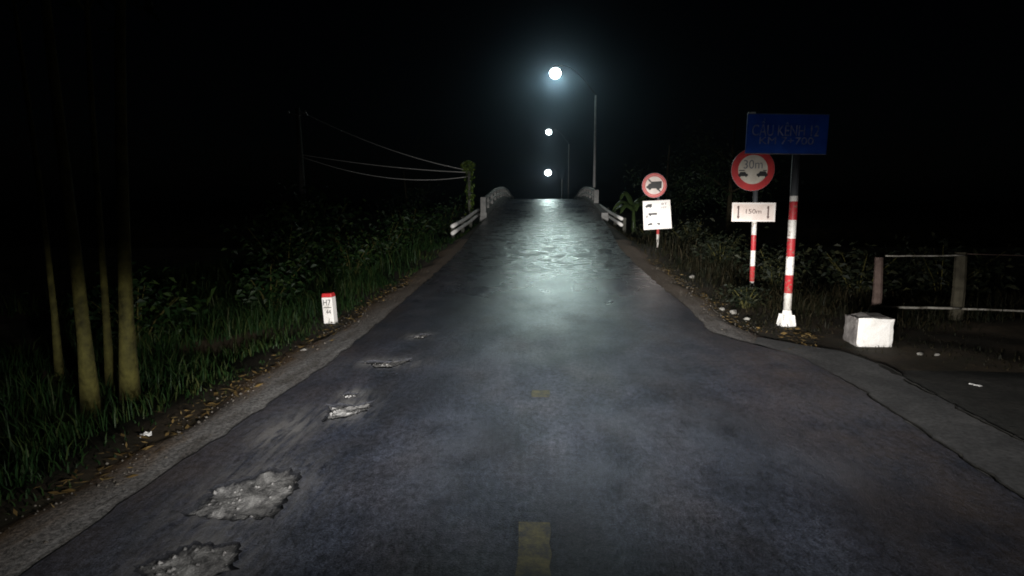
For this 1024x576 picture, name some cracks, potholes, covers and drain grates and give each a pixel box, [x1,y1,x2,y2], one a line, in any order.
pothole [356,358,413,368]
crack [833,363,1024,499]
pothole [321,401,375,422]
pothole [181,467,302,522]
pothole [133,540,242,576]
